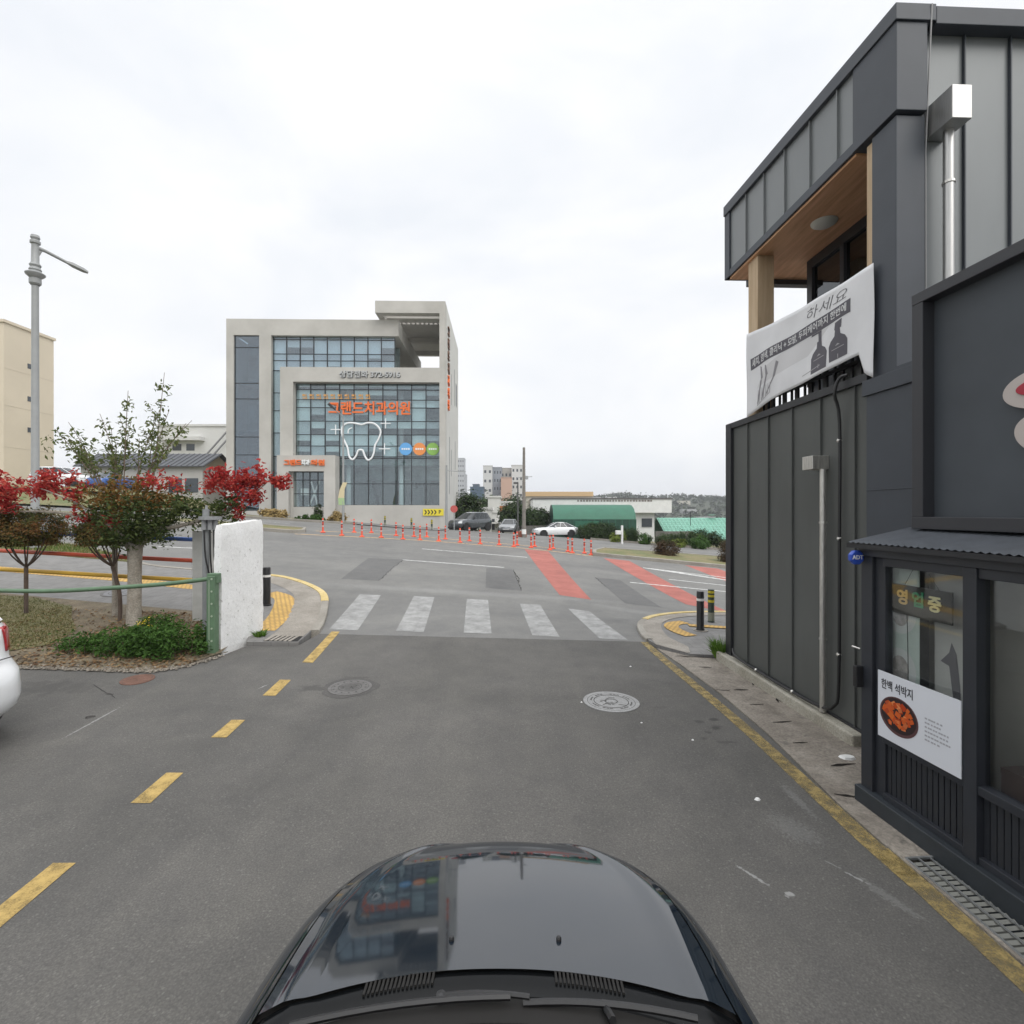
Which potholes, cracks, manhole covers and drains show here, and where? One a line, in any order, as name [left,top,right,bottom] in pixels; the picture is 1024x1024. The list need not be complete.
manhole cover [119,674,155,685]
manhole cover [322,678,380,699]
manhole cover [583,691,640,713]
drain grate [905,855,1024,959]
